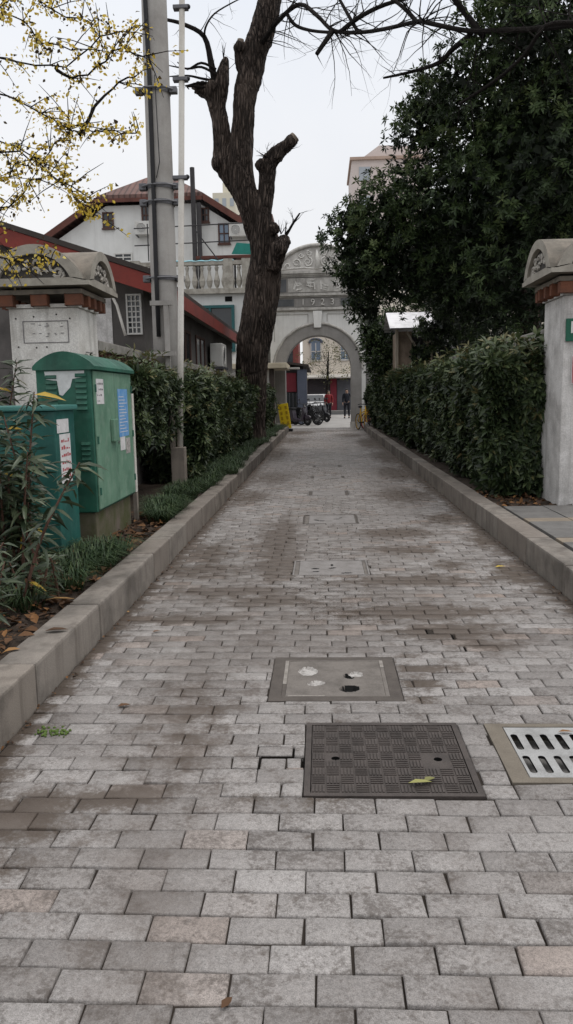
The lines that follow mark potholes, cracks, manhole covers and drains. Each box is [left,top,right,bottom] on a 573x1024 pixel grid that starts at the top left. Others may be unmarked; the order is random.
manhole cover [268,657,404,704]
crack [257,749,304,771]
manhole cover [303,514,358,524]
manhole cover [292,560,370,577]
drain grate [484,724,573,786]
manhole cover [303,723,486,800]
